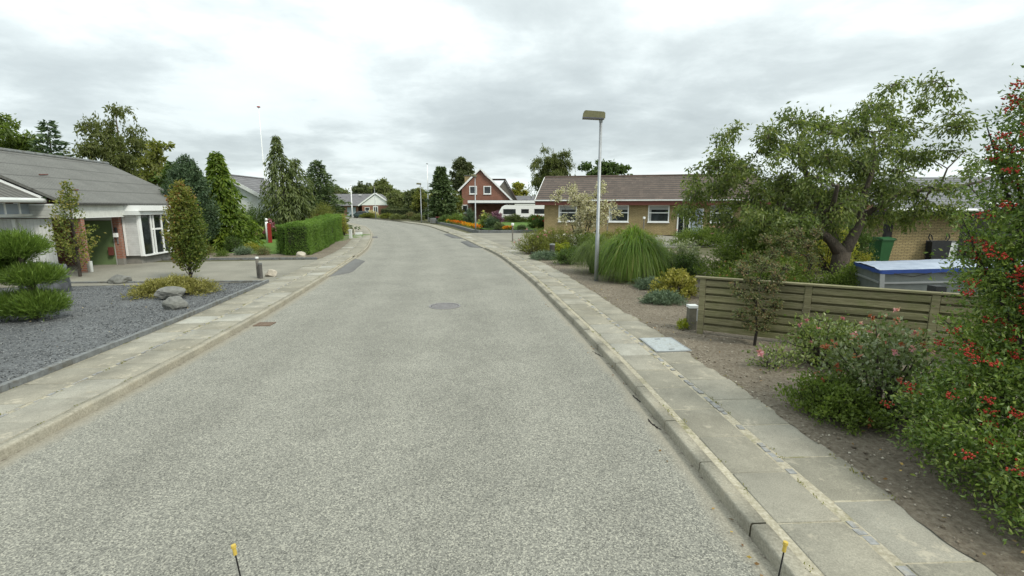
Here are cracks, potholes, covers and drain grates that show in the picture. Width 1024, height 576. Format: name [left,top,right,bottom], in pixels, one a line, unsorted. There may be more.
utility cover [639,337,692,353]
